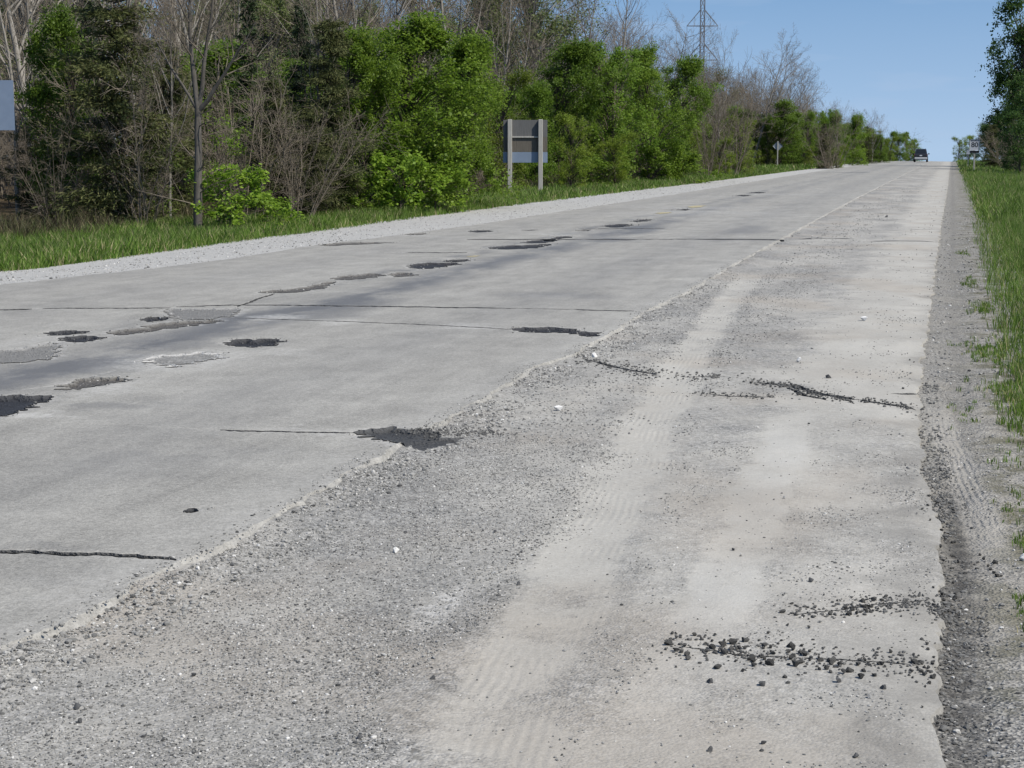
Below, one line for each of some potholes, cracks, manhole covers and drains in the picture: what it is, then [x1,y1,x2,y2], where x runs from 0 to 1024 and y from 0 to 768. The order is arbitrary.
crack [791,600,925,616]
crack [711,382,919,410]
pothole [511,327,600,337]
crack [679,646,923,667]
pothole [354,426,464,451]
crack [0,550,176,561]
pothole [0,394,54,416]
pothole [223,339,287,348]
crack [589,360,720,377]
